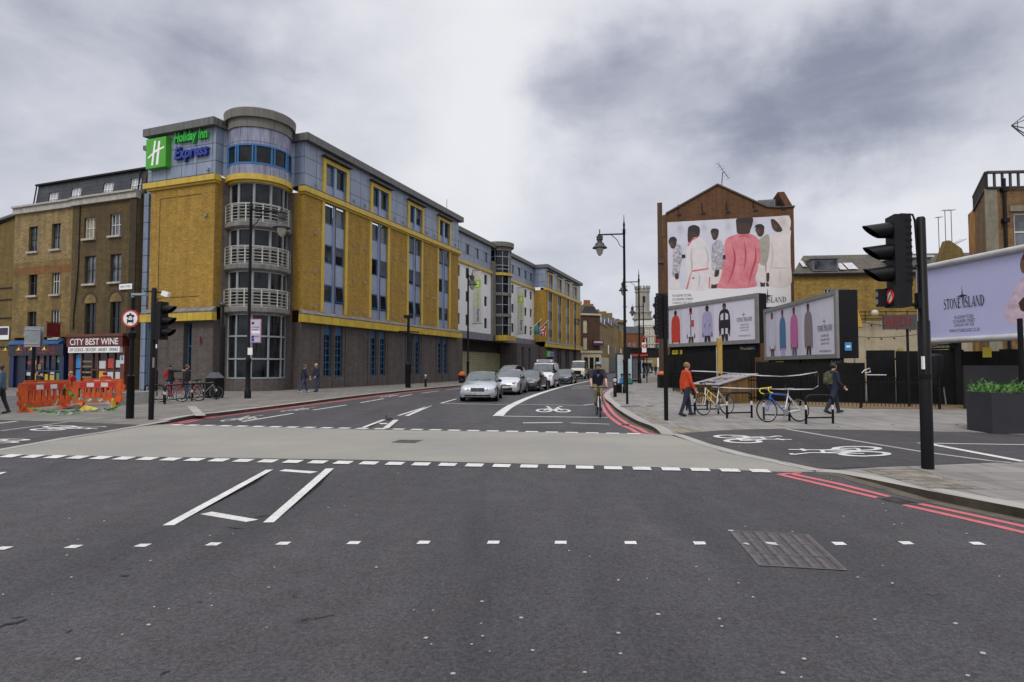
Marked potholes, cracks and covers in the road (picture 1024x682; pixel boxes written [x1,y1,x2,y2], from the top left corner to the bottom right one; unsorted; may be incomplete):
manhole cover [728,530,848,571]
crack [0,616,27,627]
